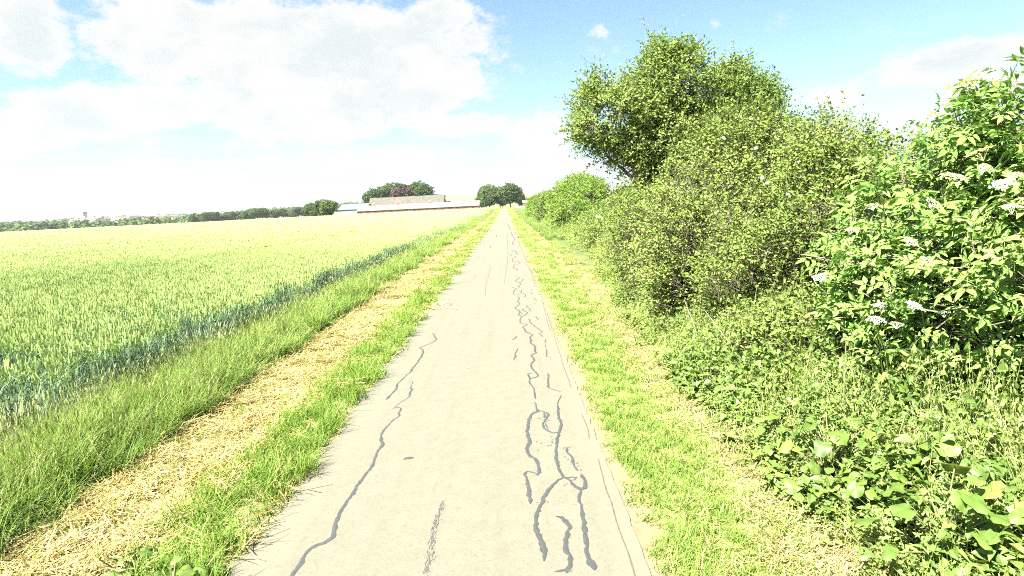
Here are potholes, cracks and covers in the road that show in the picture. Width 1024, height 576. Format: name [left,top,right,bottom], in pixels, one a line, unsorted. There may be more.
crack [510,241,636,576]
